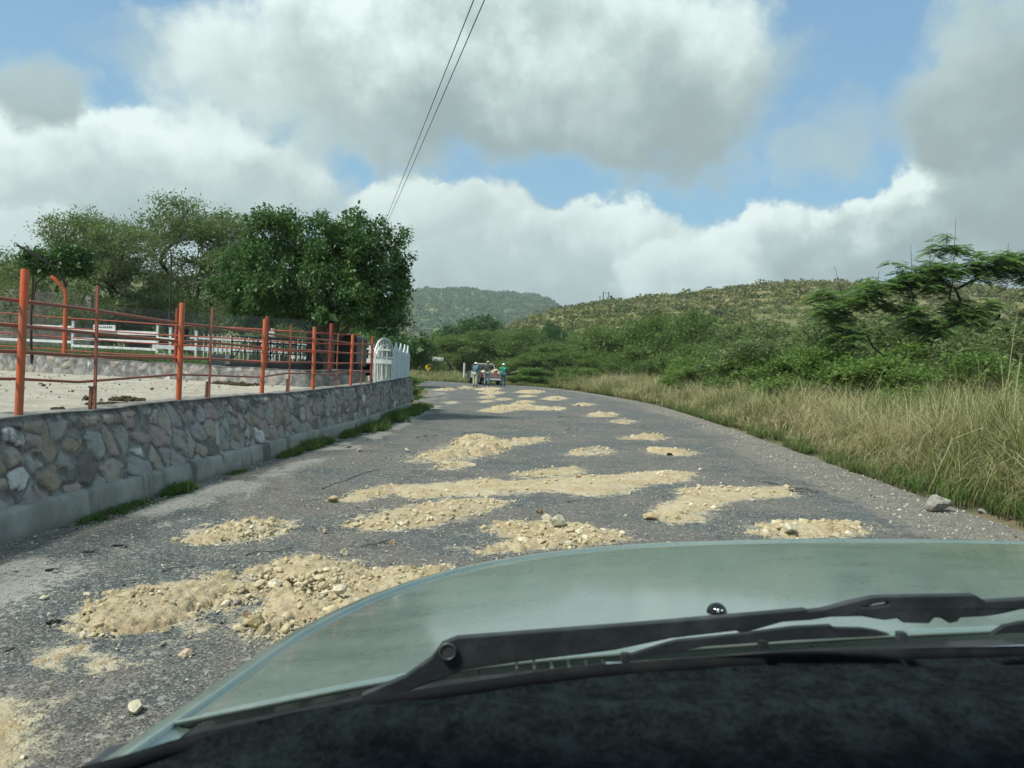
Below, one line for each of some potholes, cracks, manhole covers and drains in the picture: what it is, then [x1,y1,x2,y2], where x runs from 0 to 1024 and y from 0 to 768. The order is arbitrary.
crack [321,469,380,489]
